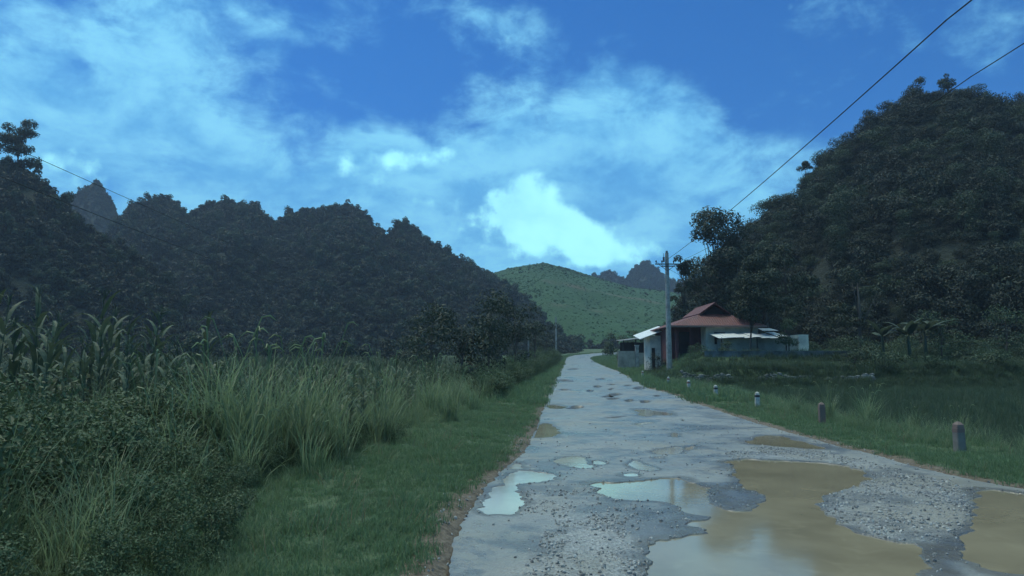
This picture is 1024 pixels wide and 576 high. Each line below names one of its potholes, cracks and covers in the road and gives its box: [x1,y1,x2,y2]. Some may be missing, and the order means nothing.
pothole [552,456,594,468]
pothole [744,435,826,449]
pothole [632,408,673,416]
pothole [651,446,685,455]
pothole [589,458,935,576]
pothole [955,489,1024,575]
pothole [534,423,562,438]
pothole [475,462,558,515]
